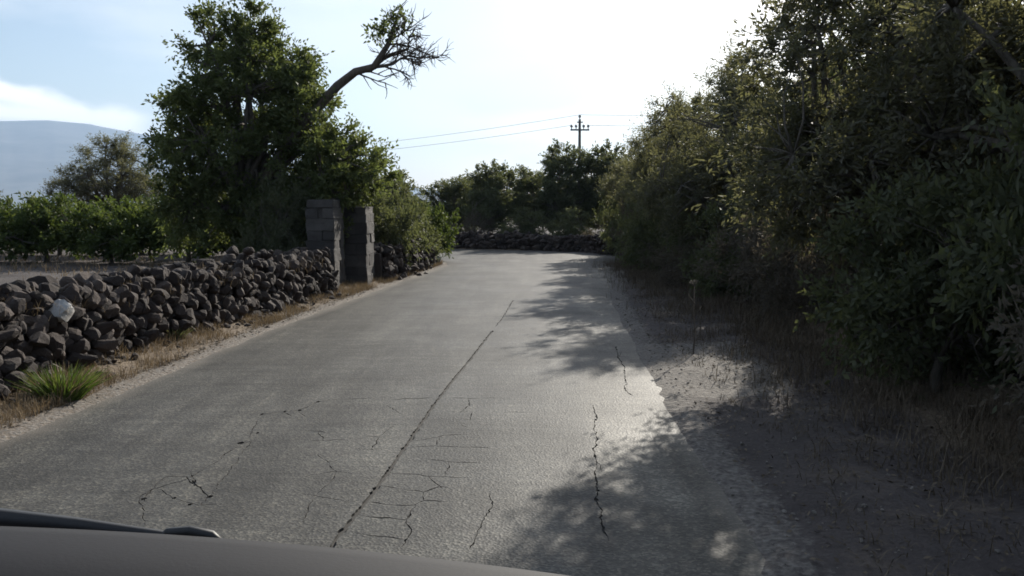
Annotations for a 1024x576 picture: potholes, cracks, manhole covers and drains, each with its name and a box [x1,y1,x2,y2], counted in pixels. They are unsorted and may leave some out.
crack [592,407,609,541]
crack [138,300,513,548]
